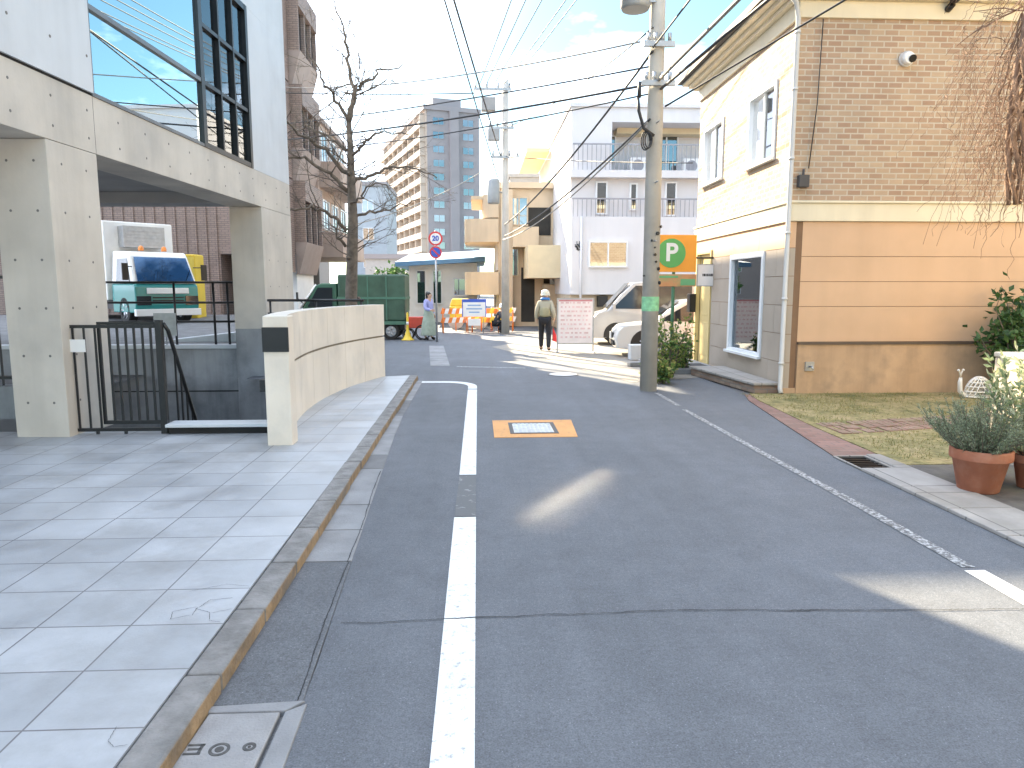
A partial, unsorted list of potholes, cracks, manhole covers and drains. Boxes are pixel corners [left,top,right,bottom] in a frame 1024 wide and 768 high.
manhole cover [173,701,307,768]
drain grate [833,455,892,471]
manhole cover [492,420,578,438]
crack [170,584,246,622]
